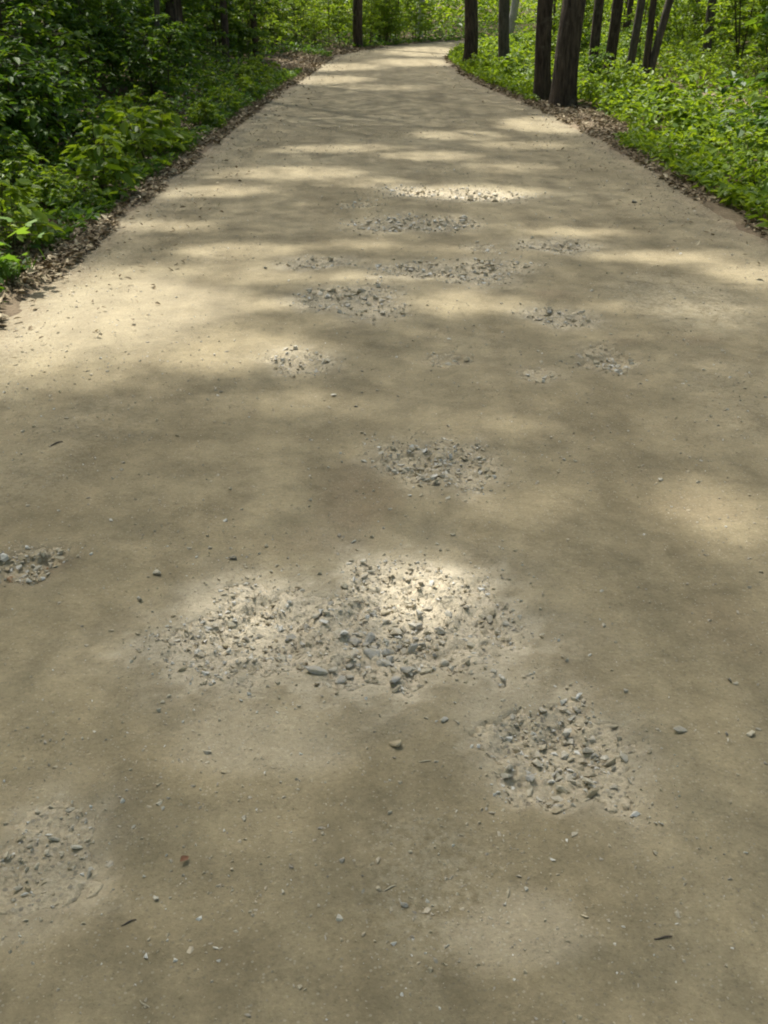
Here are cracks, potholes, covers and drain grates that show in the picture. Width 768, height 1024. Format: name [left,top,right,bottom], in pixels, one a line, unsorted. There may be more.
pothole [250,342,358,379]
pothole [463,678,697,839]
pothole [511,302,611,328]
pothole [349,252,550,289]
pothole [0,782,146,950]
pothole [566,340,654,376]
pothole [339,211,488,235]
pothole [352,427,514,503]
pothole [87,534,581,743]
pothole [0,540,83,589]
pothole [506,235,600,255]
pothole [274,279,420,326]
